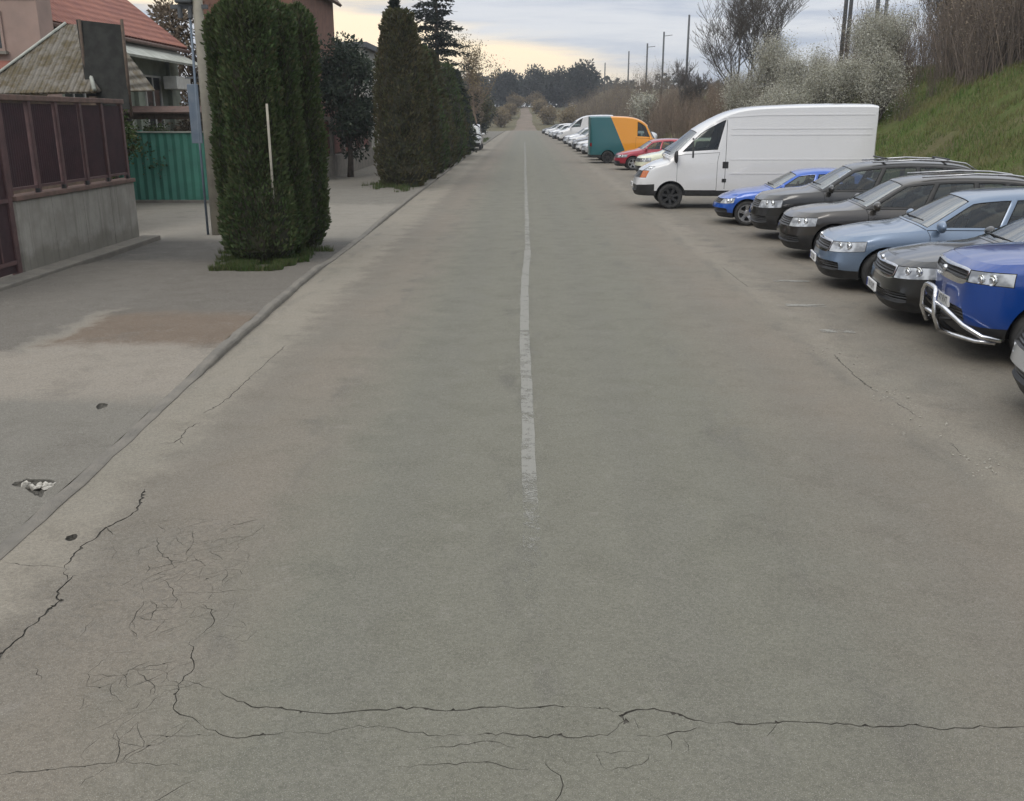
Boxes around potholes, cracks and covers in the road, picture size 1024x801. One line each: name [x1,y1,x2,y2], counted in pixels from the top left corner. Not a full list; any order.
crack [723,268,967,458]
crack [0,489,1024,785]
crack [159,347,283,444]
